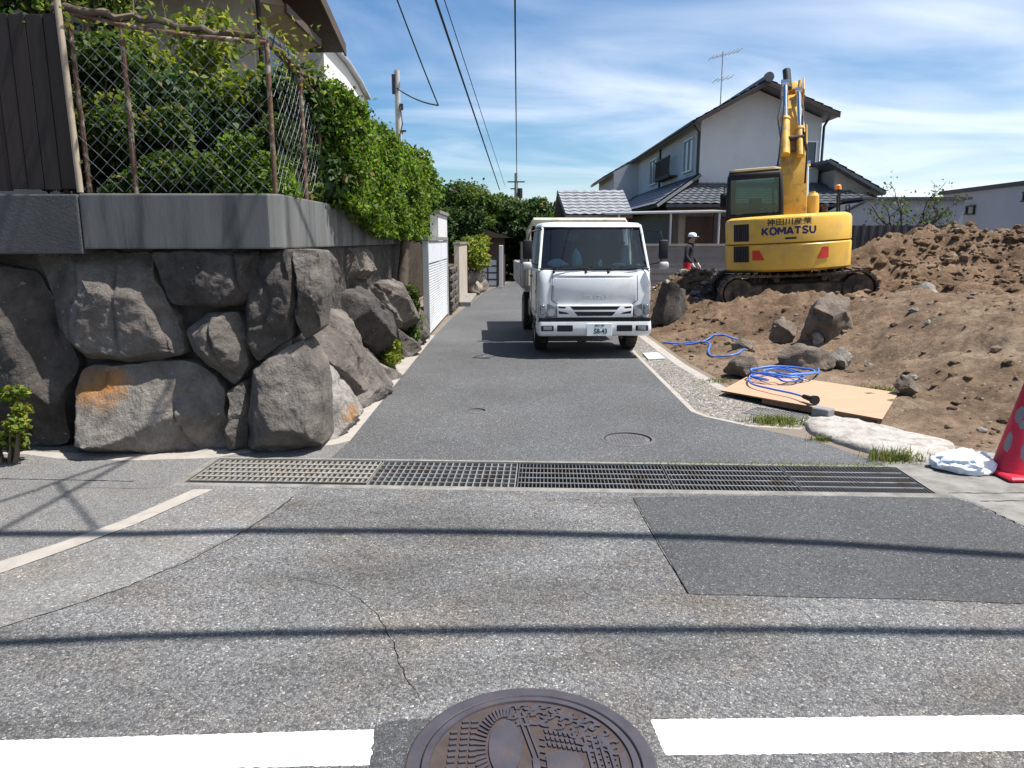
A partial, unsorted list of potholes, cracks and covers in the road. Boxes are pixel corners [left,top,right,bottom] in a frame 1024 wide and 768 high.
drain grate [780,467,932,493]
drain grate [662,465,803,491]
manhole cover [600,432,655,446]
crack [289,576,424,703]
drain grate [517,463,673,490]
manhole cover [404,688,658,768]
drain grate [367,461,518,487]
drain grate [190,459,382,485]
